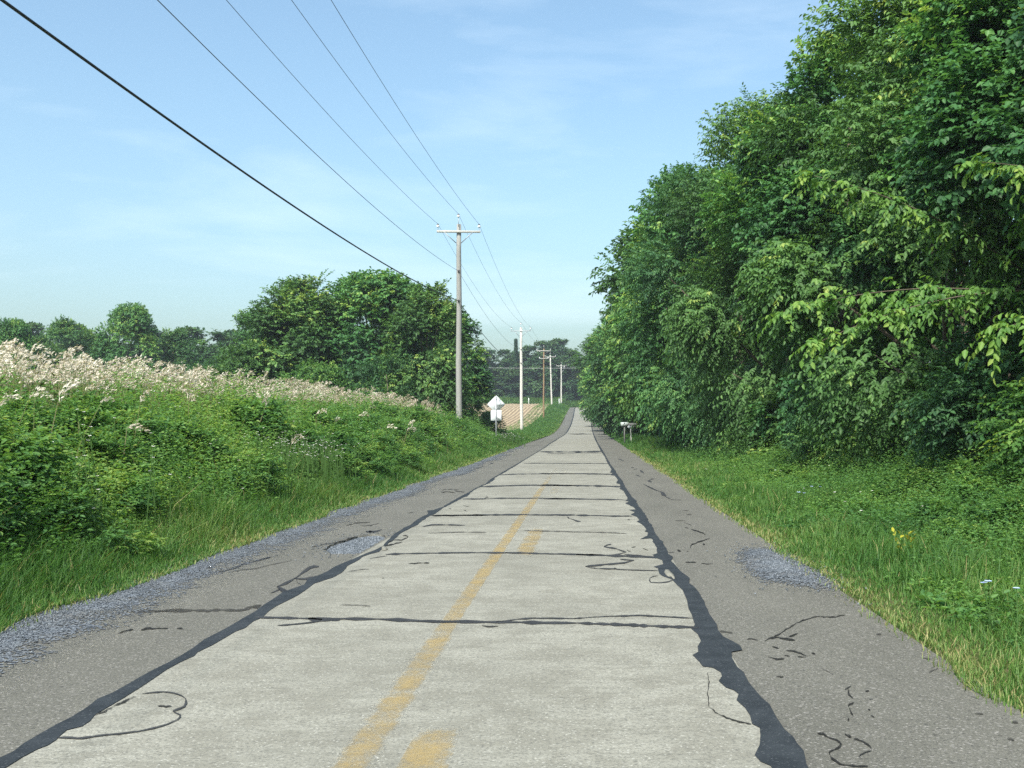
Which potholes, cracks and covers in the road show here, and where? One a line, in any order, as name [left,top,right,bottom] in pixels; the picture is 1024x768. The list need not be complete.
crack [720,615,874,767]
crack [707,673,751,724]
crack [670,510,710,564]
crack [120,604,261,633]
